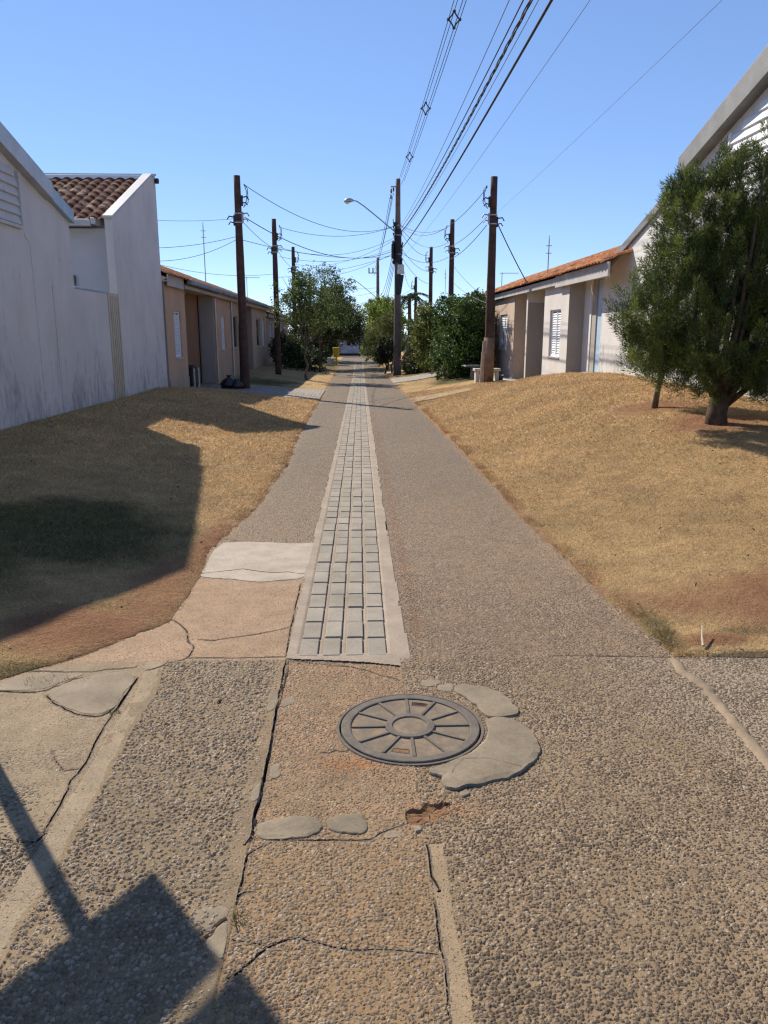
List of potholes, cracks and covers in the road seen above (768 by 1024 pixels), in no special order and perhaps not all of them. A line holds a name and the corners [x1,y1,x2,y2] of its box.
pothole [403,802,452,826]
manhole cover [336,693,484,767]
crack [0,569,454,1024]
